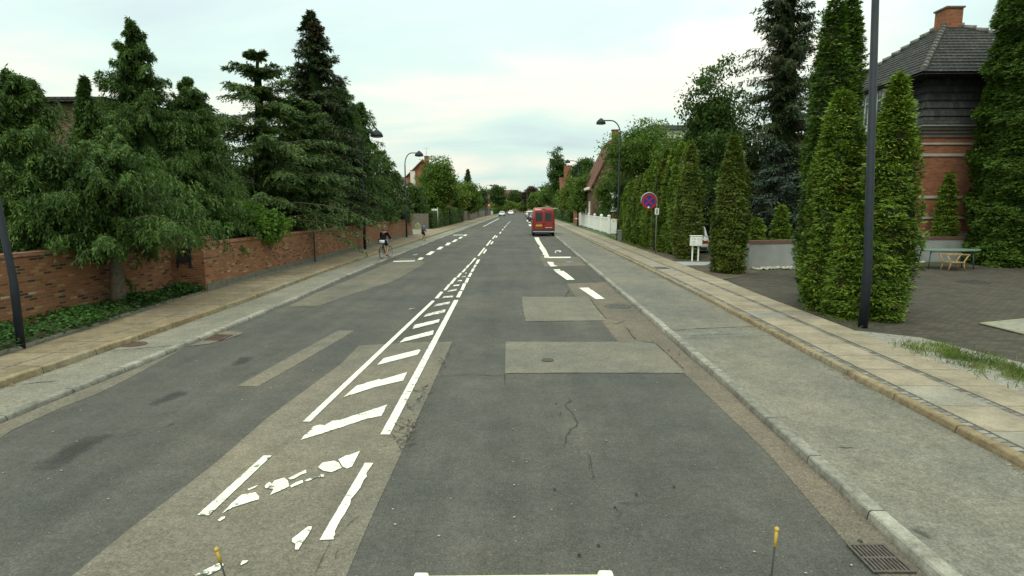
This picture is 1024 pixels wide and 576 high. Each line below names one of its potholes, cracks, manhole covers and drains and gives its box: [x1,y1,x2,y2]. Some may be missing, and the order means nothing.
crack [559,401,594,478]
